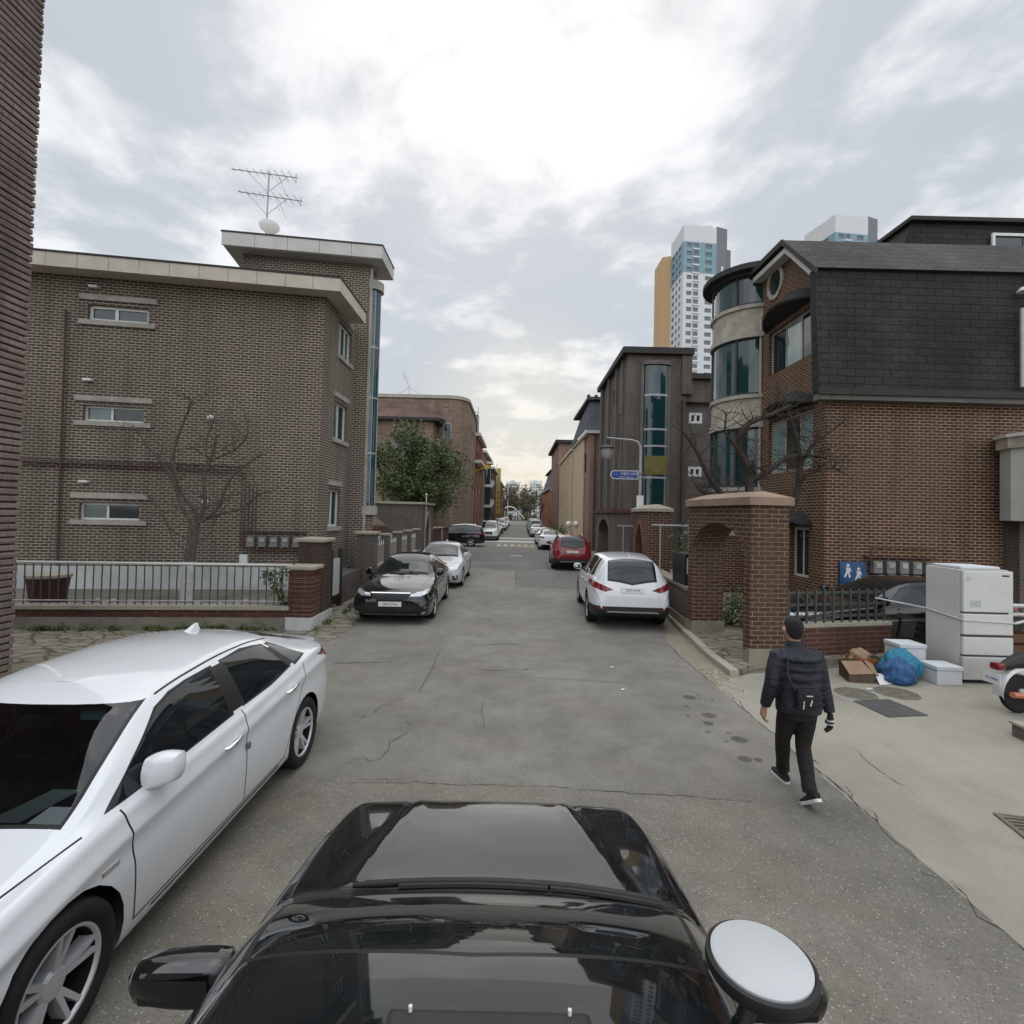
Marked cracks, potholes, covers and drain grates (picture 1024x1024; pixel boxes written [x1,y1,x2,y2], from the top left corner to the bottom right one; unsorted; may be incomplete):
manhole cover [873,686,922,700]
crack [925,873,1023,949]
crack [356,648,444,761]
manhole cover [833,687,879,700]
drain grate [993,812,1024,838]
